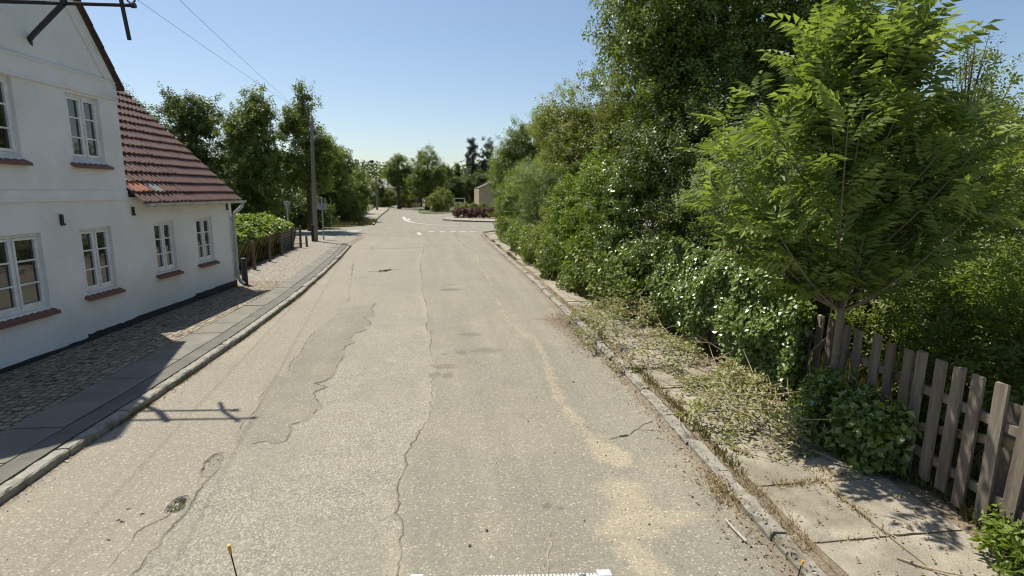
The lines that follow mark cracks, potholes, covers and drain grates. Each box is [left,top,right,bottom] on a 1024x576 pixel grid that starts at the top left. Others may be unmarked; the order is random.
pothole [163,495,192,514]
crack [108,244,439,576]
crack [610,420,654,440]
